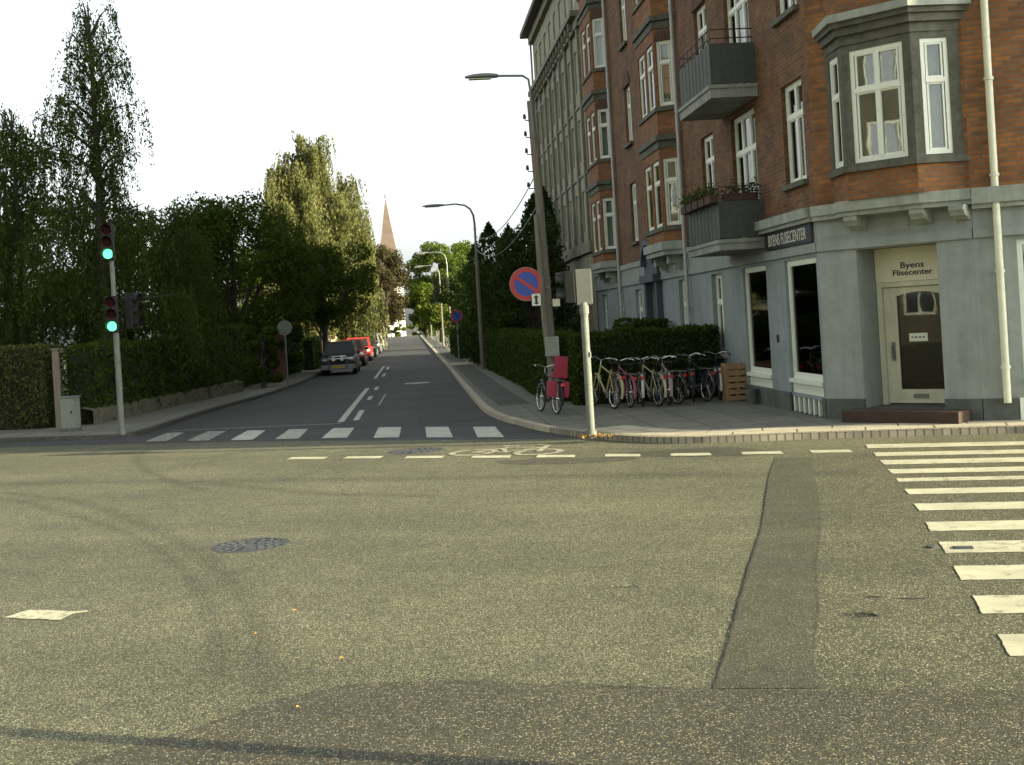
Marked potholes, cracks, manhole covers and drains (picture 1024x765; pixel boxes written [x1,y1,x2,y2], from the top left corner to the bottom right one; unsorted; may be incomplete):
manhole cover [211,537,289,553]
